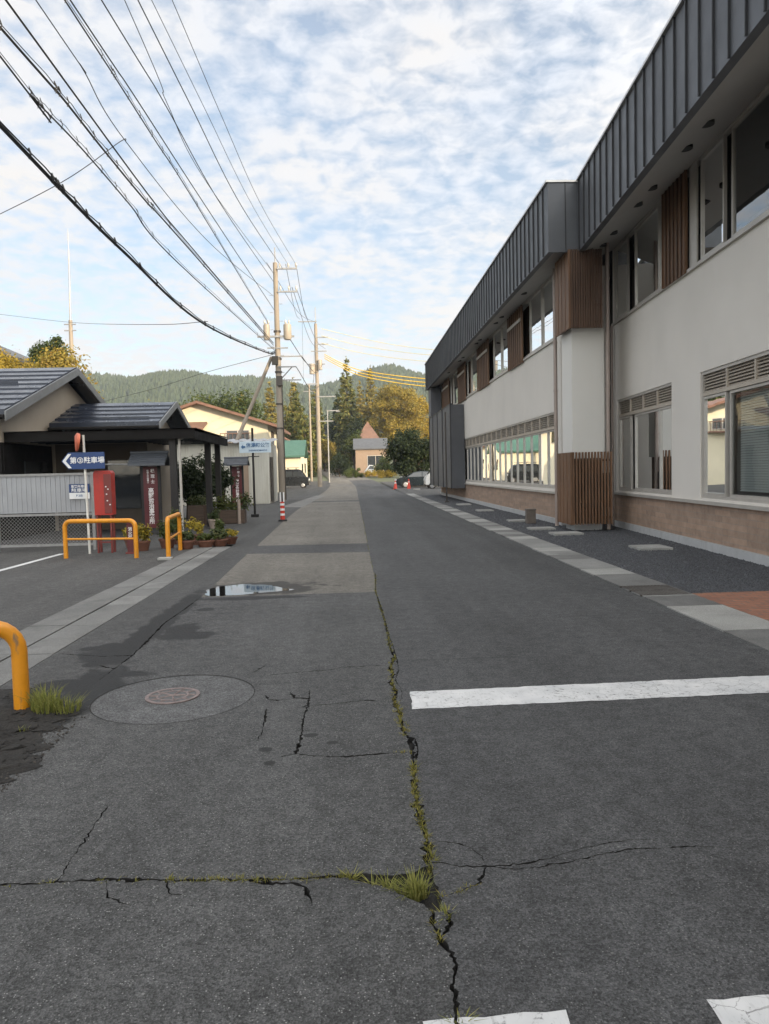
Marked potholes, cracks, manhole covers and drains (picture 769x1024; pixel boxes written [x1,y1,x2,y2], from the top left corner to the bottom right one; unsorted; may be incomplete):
manhole cover [89,675,255,724]
crack [252,573,729,896]
crack [429,909,460,1024]
crack [0,805,352,906]
